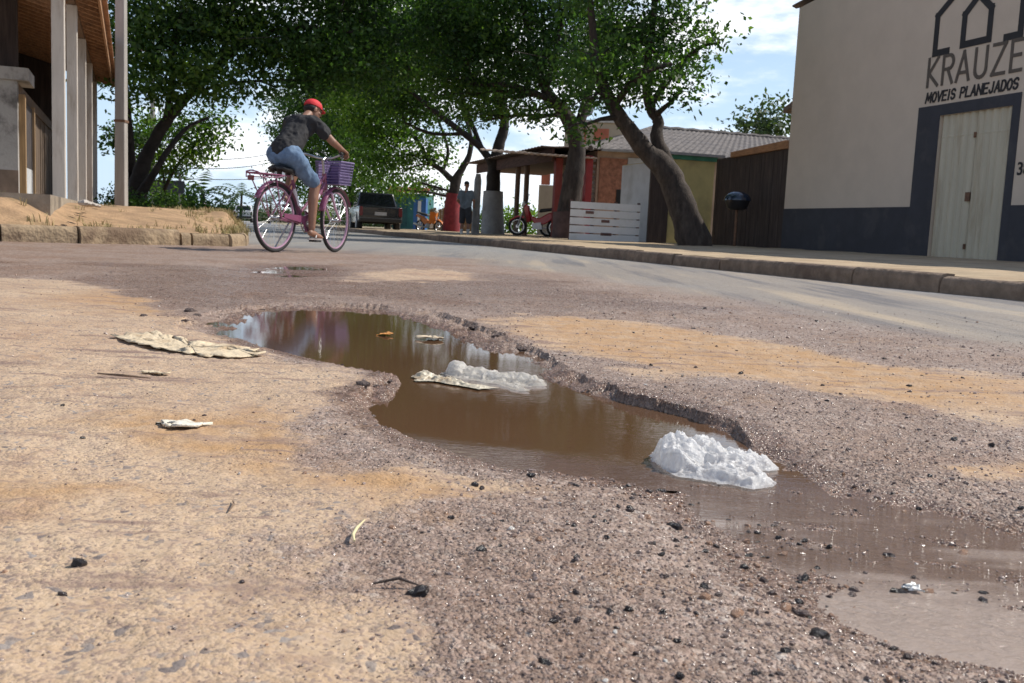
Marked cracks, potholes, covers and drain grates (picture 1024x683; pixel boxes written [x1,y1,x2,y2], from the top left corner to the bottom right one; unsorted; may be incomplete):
pothole [167,301,775,521]
pothole [247,265,333,278]
